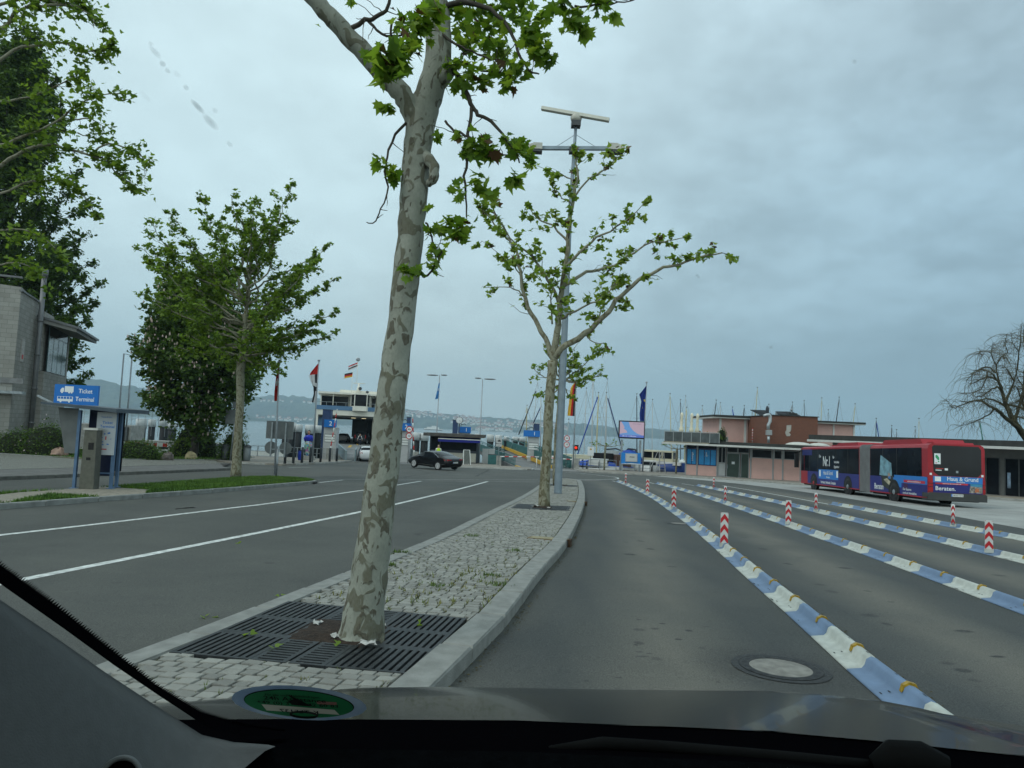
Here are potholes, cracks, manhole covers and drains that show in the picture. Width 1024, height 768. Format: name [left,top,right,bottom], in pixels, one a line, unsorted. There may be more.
manhole cover [731,654,833,684]
